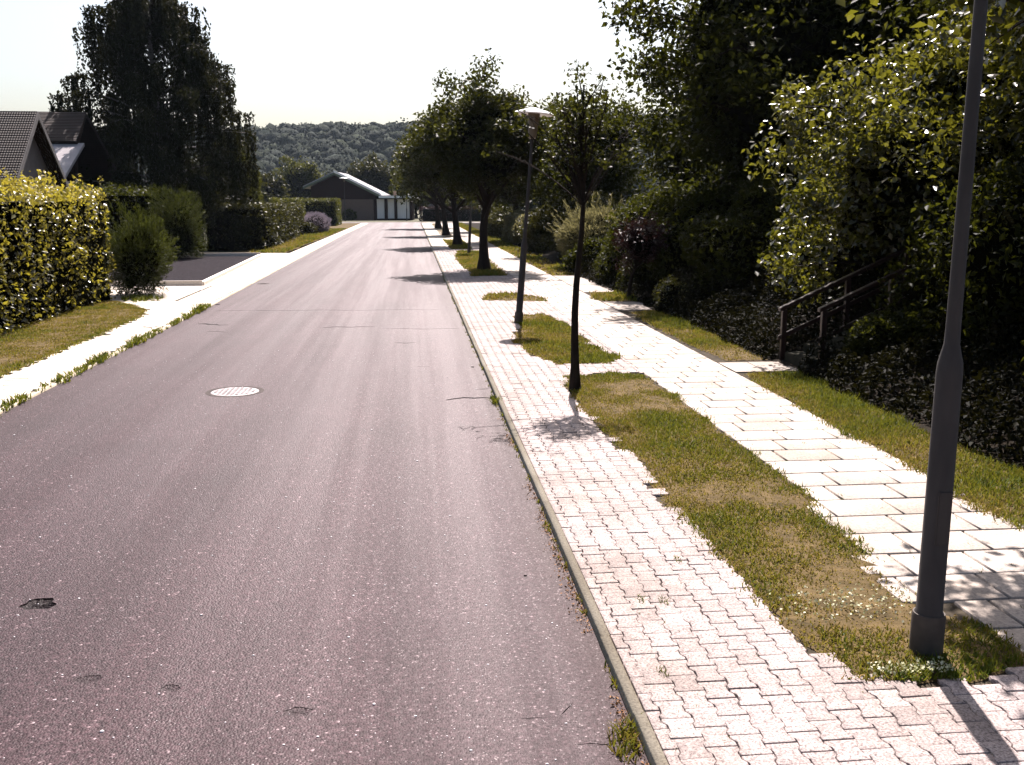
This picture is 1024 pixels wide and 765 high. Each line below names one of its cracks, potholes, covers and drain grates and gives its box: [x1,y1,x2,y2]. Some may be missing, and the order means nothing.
pothole [72,675,101,683]
manhole cover [205,386,264,397]
pothole [282,707,313,717]
pothole [159,684,181,693]
pothole [19,598,56,610]
